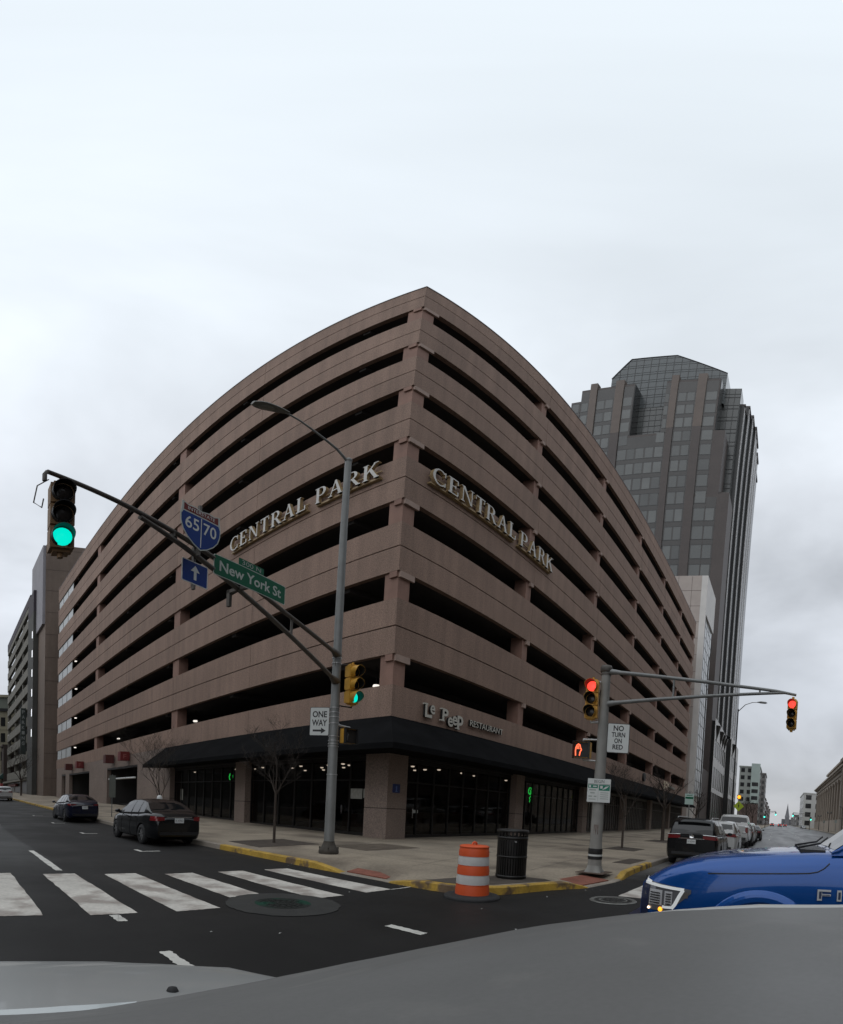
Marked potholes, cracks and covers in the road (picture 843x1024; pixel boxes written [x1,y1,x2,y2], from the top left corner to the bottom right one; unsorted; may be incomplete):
manhole cover [589,896,637,905]
manhole cover [225,893,341,916]
